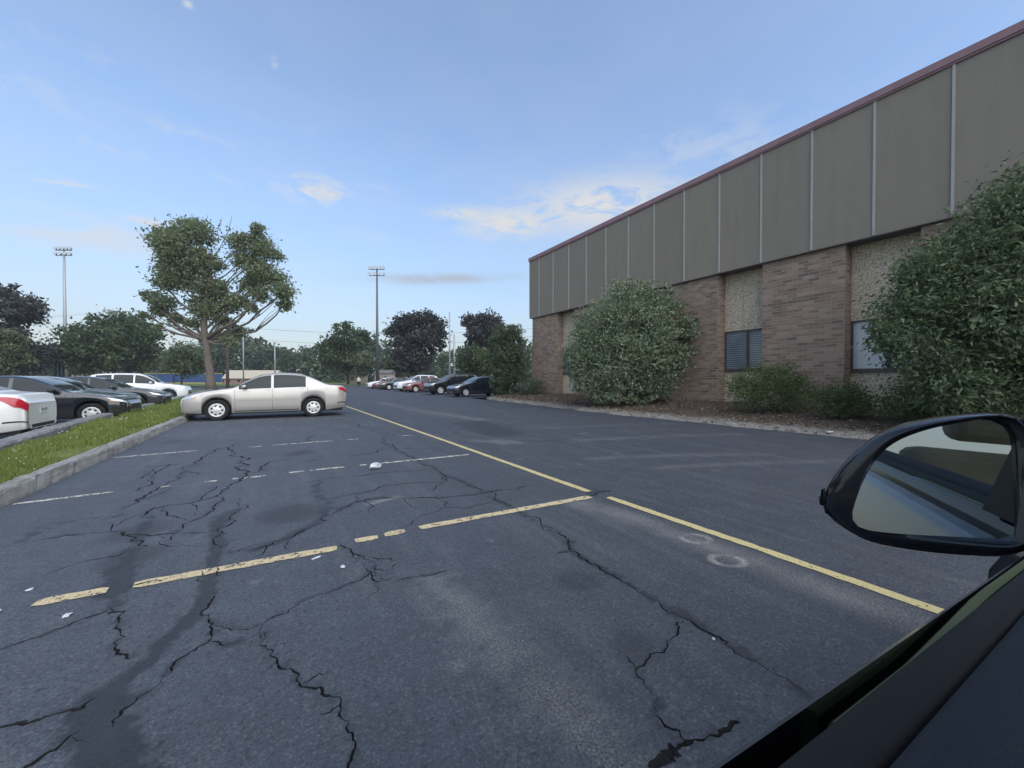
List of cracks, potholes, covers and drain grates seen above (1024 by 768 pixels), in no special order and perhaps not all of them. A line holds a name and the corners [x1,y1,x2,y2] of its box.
crack [648,720,740,768]
crack [0,545,447,768]
crack [36,443,297,573]
